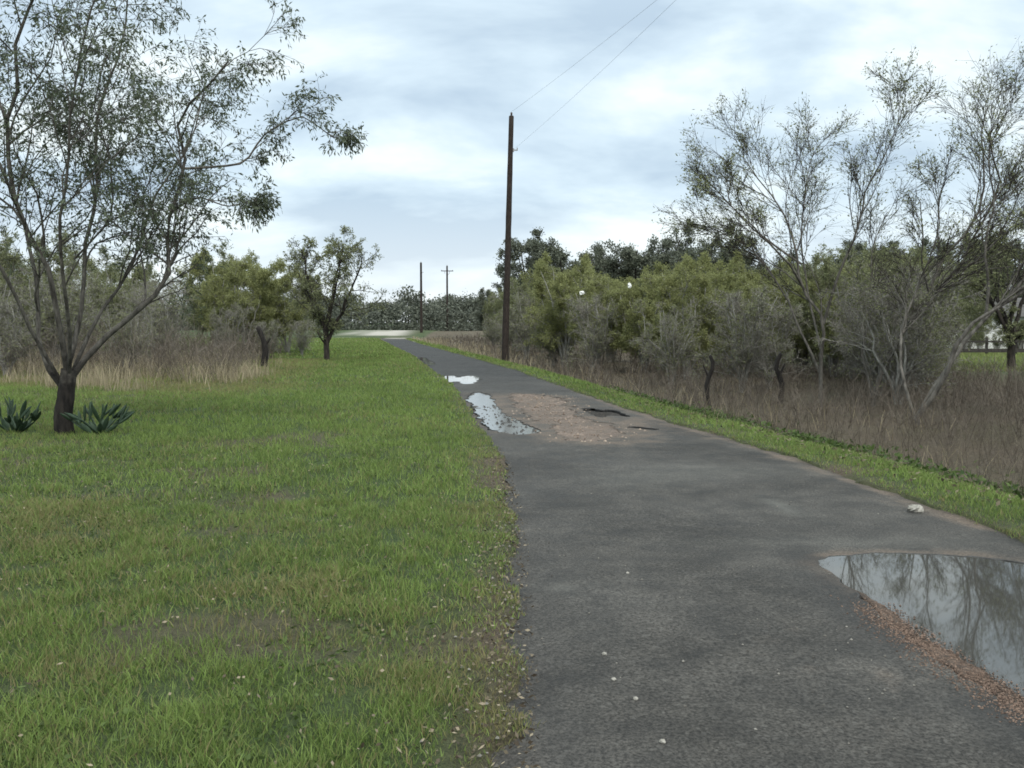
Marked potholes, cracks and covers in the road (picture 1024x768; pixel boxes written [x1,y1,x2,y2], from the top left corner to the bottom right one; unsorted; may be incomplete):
pothole [464,392,540,433]
pothole [818,552,1024,714]
pothole [507,393,626,441]
